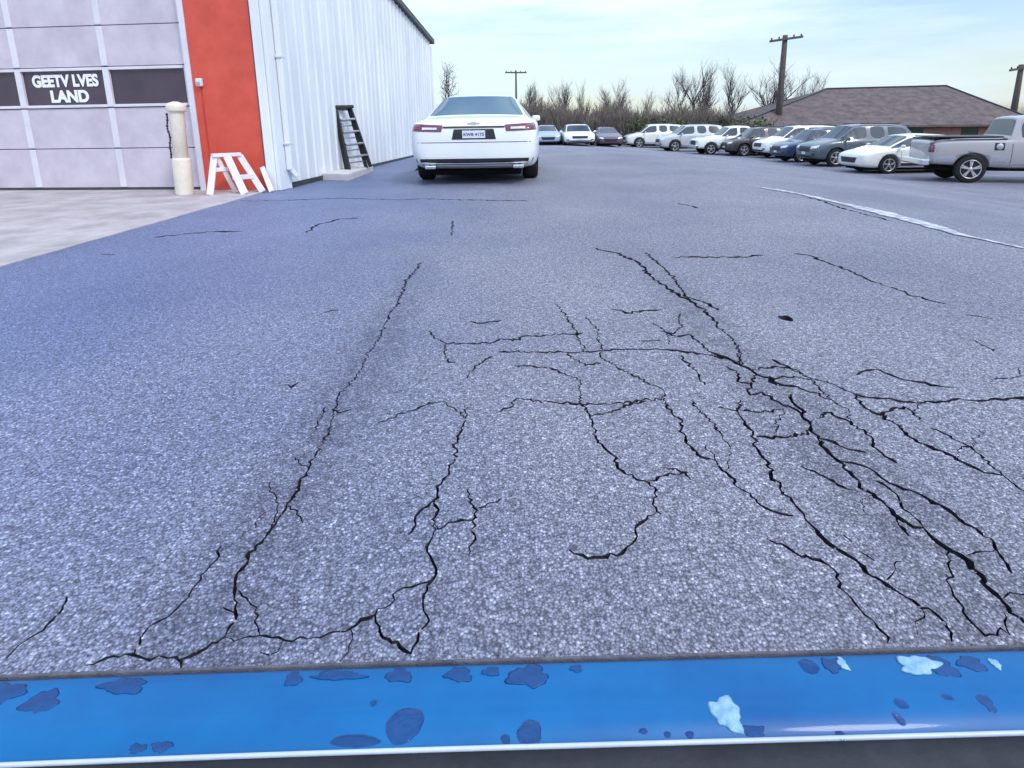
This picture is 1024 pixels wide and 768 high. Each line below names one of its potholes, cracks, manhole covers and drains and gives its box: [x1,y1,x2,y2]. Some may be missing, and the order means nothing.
crack [84,263,501,668]
crack [428,248,1024,643]
